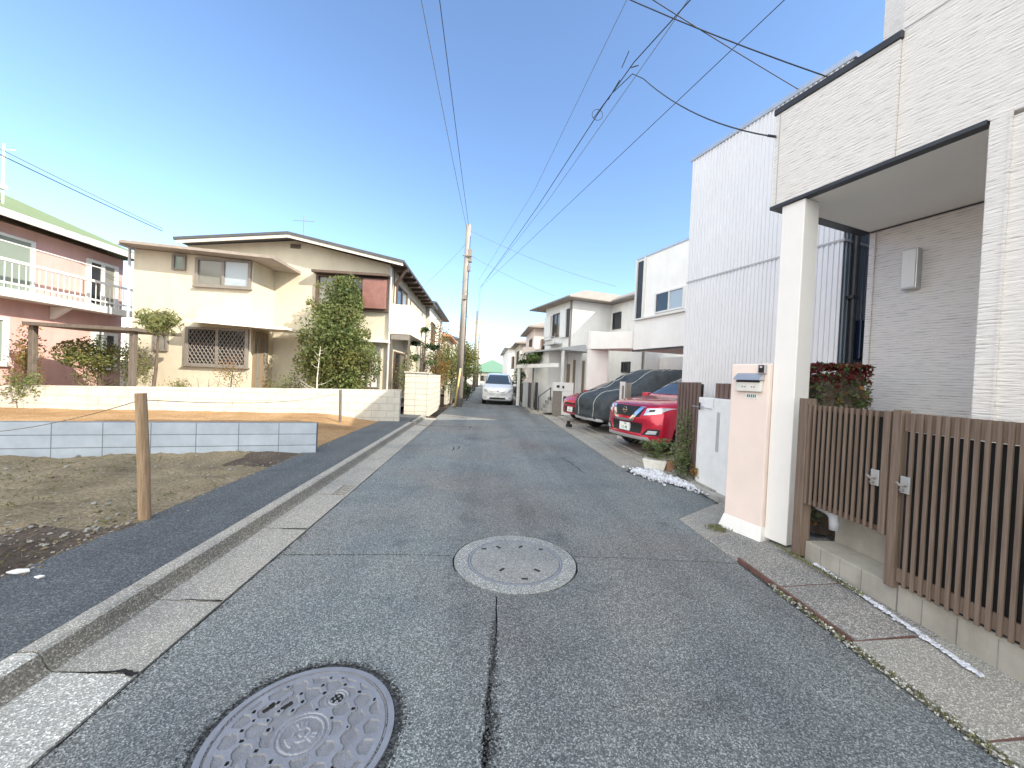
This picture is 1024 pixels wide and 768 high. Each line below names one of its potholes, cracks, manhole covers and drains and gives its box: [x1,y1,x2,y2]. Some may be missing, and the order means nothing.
crack [481,597,498,768]
manhole cover [454,535,576,596]
manhole cover [183,664,403,768]
